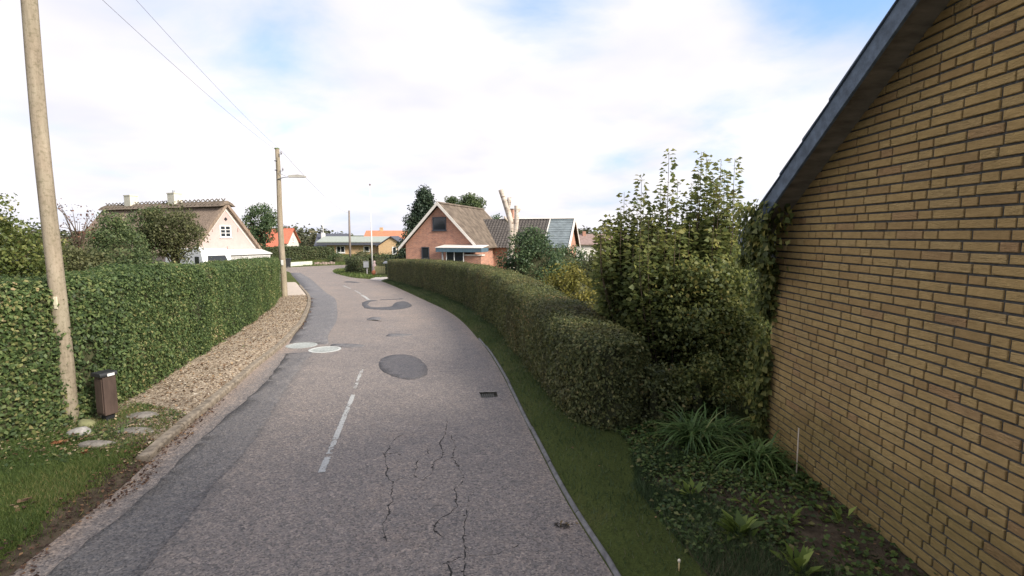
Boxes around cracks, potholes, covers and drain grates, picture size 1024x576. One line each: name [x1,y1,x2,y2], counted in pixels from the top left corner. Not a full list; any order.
crack [382,421,518,576]
